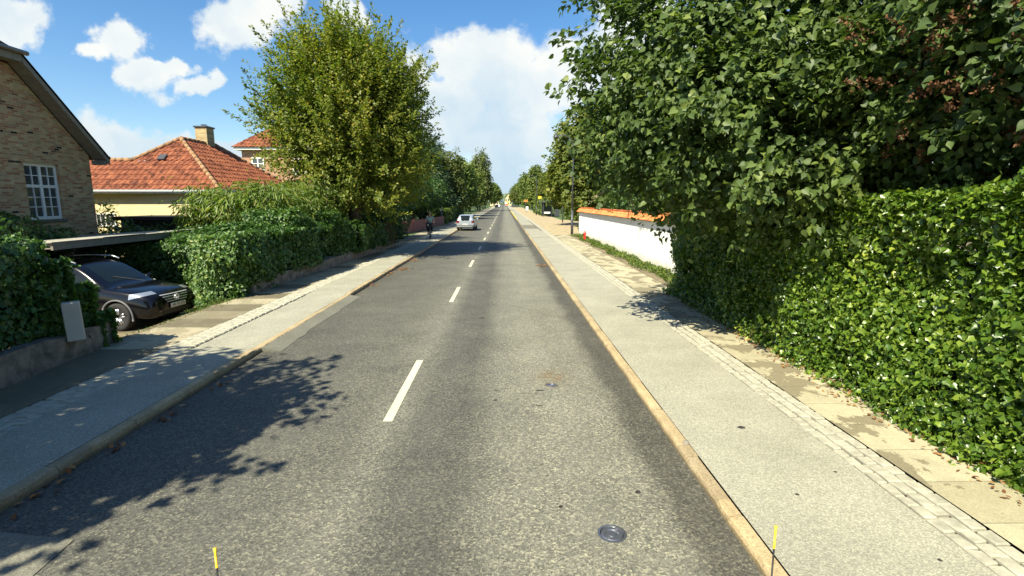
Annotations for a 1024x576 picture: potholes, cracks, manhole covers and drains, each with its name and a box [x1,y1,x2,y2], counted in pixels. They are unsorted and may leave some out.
manhole cover [597,524,627,543]
